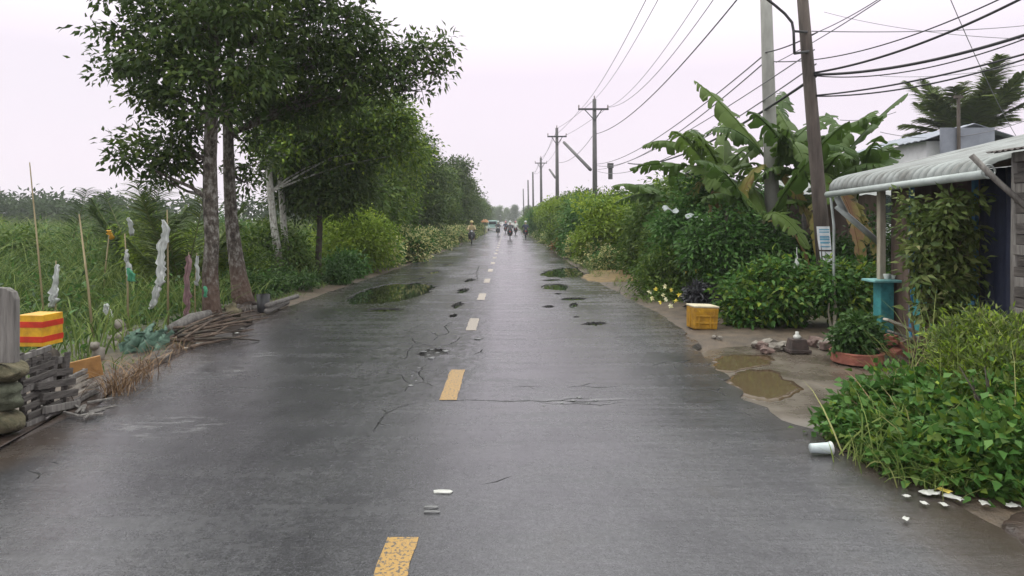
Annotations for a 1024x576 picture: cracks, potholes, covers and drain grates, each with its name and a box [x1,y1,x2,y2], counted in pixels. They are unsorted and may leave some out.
pothole [416,348,448,358]
crack [373,322,635,432]
